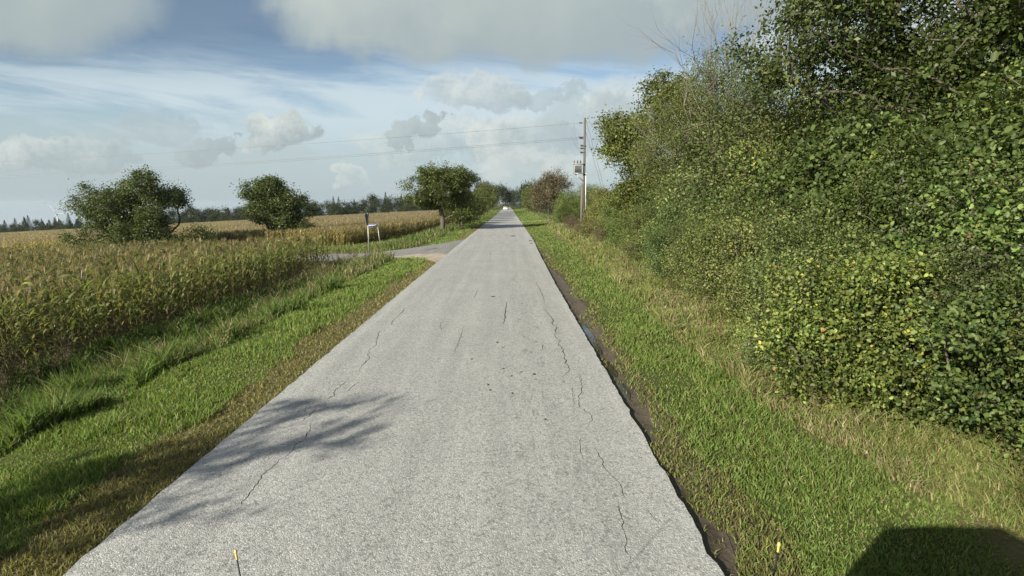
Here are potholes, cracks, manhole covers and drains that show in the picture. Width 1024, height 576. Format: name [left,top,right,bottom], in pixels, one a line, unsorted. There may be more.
crack [236,308,405,511]
crack [538,287,631,559]
